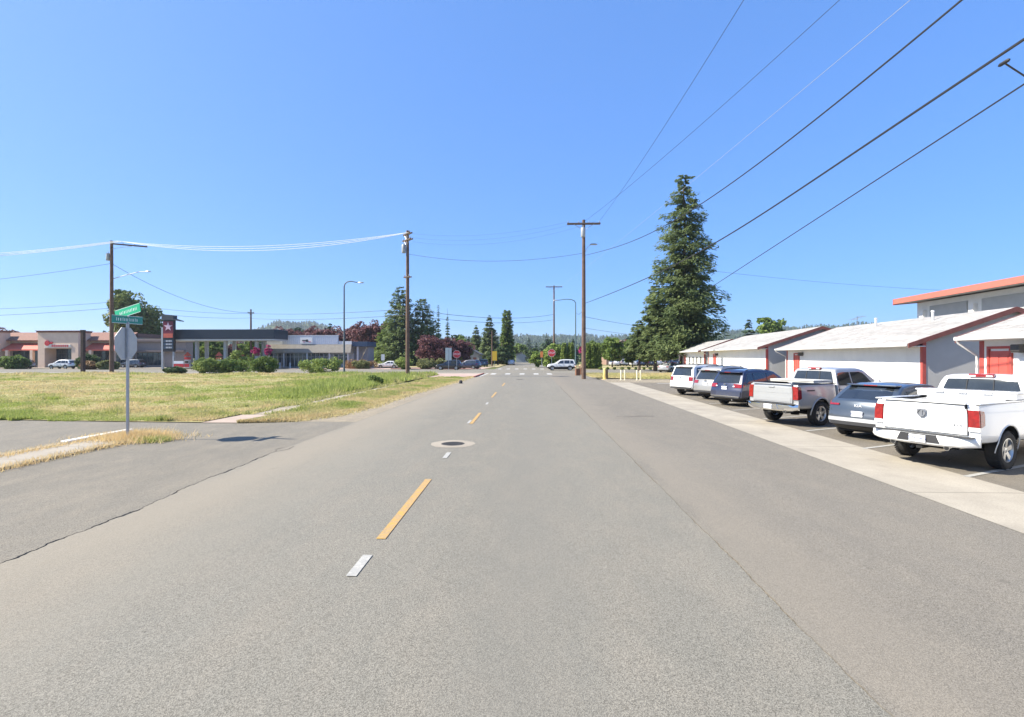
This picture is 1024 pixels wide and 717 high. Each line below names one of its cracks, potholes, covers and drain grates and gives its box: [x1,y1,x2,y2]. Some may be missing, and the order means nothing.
crack [2,447,292,563]
manhole cover [431,440,475,448]
